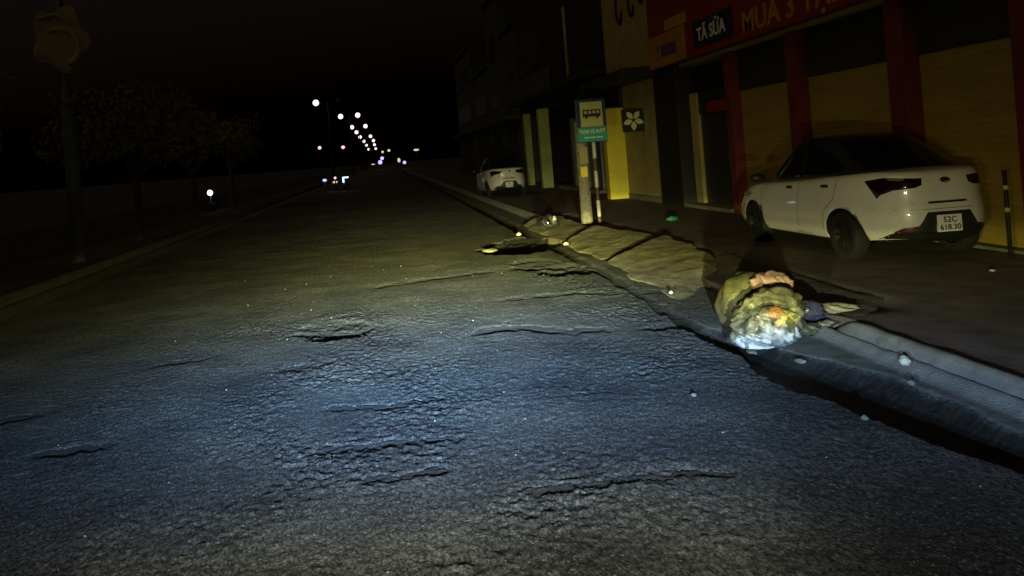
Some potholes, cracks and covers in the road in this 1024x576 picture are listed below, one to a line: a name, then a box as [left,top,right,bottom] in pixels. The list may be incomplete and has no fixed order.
pothole [479,238,557,255]
crack [521,470,734,498]
crack [31,443,112,459]
crack [473,326,610,336]
pothole [293,319,374,342]
crack [375,272,662,301]
crack [312,436,461,484]
